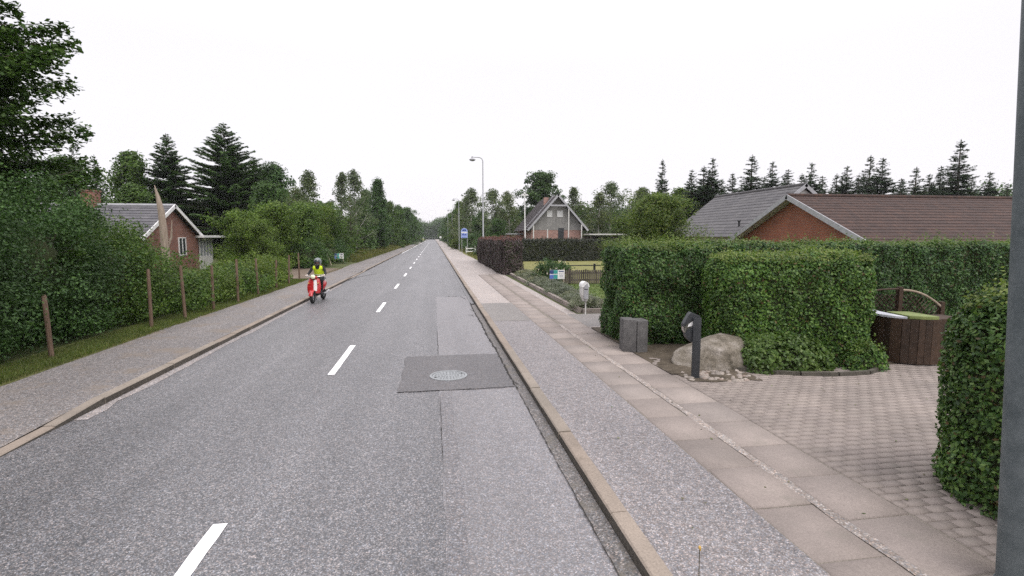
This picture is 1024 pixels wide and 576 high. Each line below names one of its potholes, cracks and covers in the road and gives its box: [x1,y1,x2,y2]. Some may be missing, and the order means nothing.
manhole cover [430,370,467,381]
